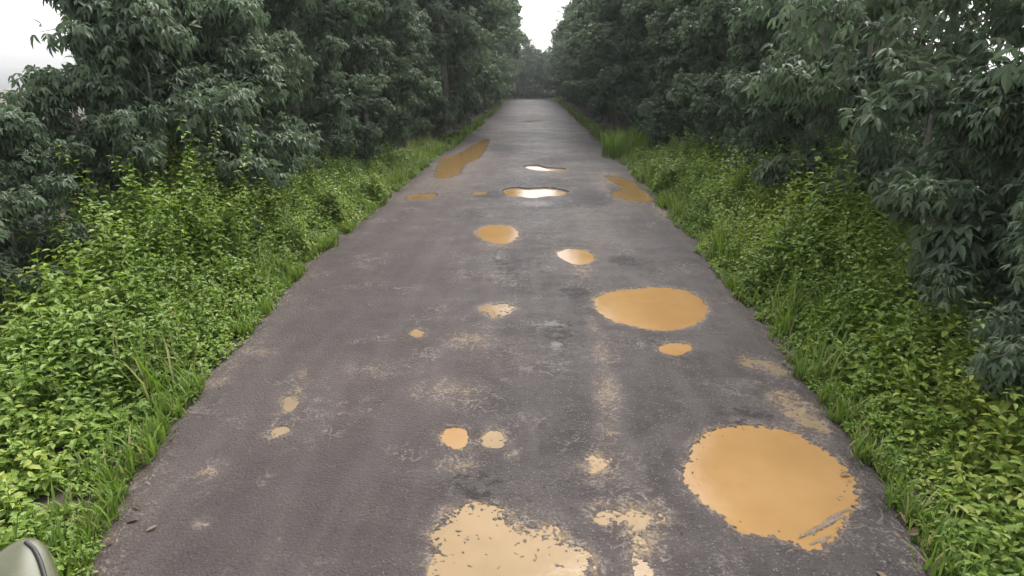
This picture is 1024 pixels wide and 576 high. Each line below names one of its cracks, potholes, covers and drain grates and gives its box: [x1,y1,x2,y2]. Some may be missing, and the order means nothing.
pothole [267,425,291,439]
pothole [280,394,302,412]
pothole [657,342,694,355]
pothole [426,500,598,576]
pothole [408,328,428,337]
pothole [581,452,614,475]
pothole [501,187,570,198]
pothole [479,428,508,449]
pothole [589,501,668,576]
pothole [680,423,862,551]
pothole [605,175,656,202]
pothole [439,426,470,449]
